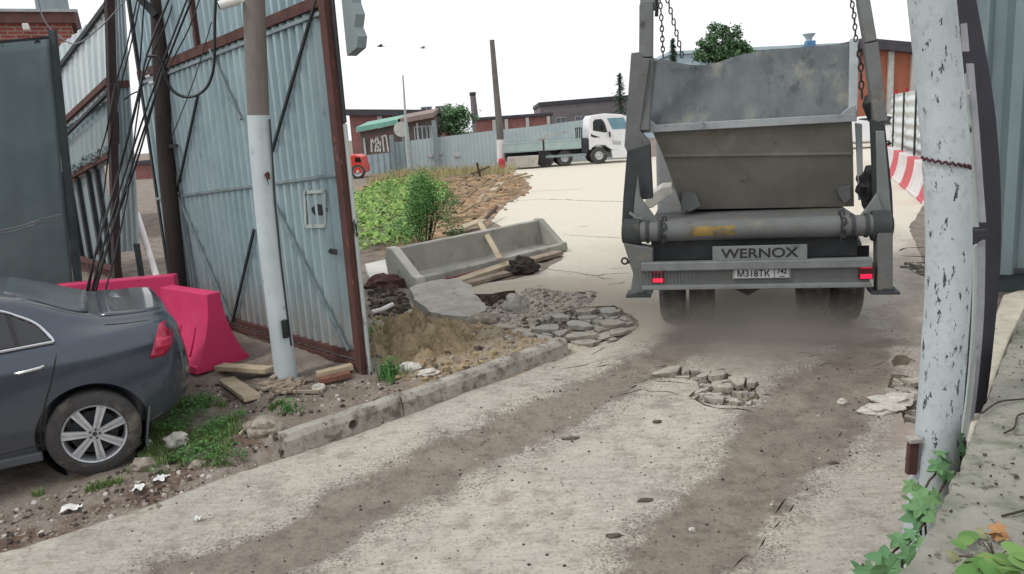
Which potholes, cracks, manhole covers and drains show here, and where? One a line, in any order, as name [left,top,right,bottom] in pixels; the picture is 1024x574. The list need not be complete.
pothole [474,290,516,310]
pothole [891,355,915,366]
